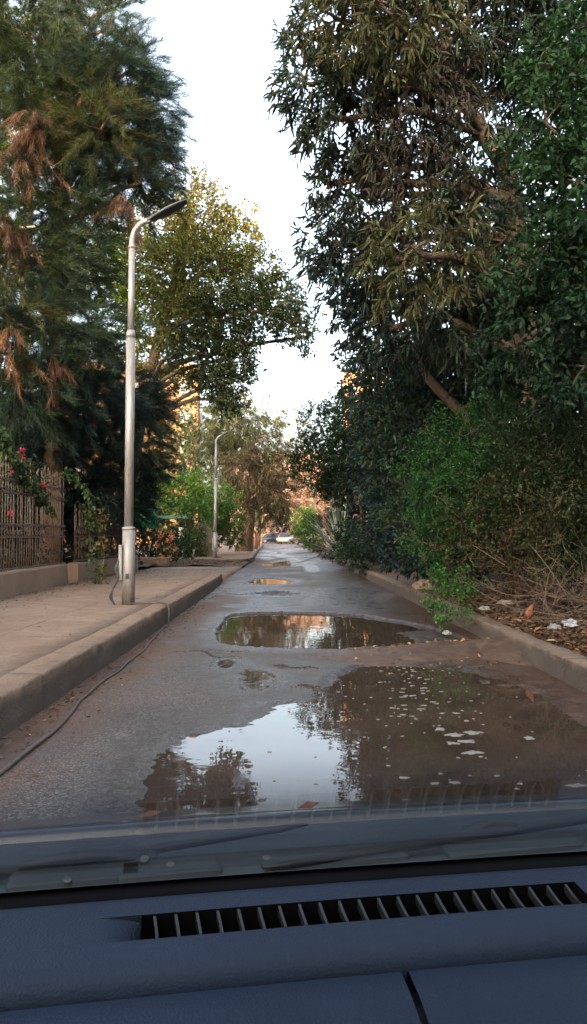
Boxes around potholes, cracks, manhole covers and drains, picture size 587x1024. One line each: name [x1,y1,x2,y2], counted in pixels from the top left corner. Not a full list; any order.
crack [272,664,321,690]
pothole [210,658,241,670]
pothole [209,611,476,650]
crack [169,649,249,659]
pothole [241,577,296,585]
pothole [232,668,281,693]
